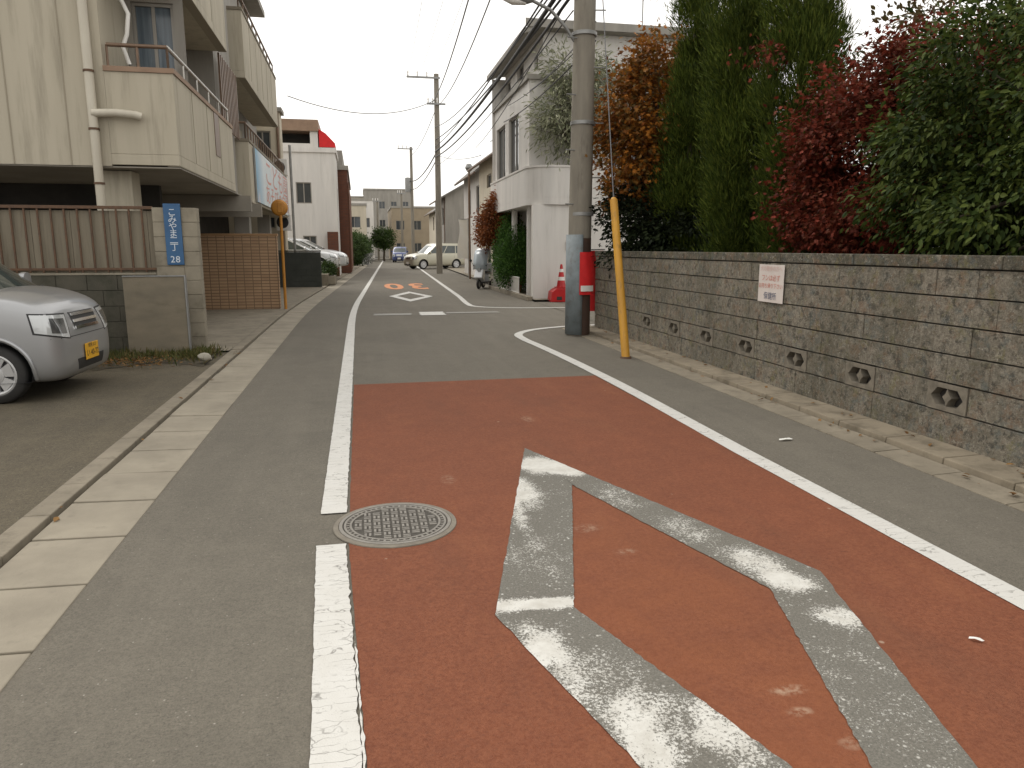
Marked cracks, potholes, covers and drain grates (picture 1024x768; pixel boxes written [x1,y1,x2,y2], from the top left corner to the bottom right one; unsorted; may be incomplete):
manhole cover [333,502,457,548]
